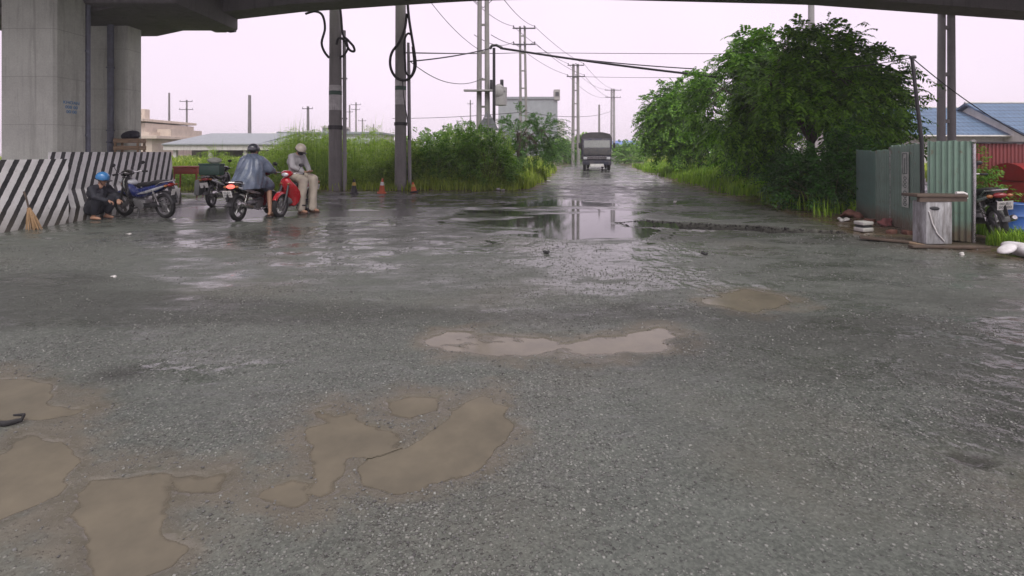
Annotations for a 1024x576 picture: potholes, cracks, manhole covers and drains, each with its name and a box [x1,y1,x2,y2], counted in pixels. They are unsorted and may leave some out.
pothole [697,288,795,314]
pothole [167,461,241,501]
crack [613,220,847,234]
pothole [419,328,563,358]
pothole [0,372,100,425]
pothole [48,466,204,576]
pothole [352,391,522,500]
pothole [290,401,411,500]
pothole [0,430,93,525]
pothole [557,325,684,361]
